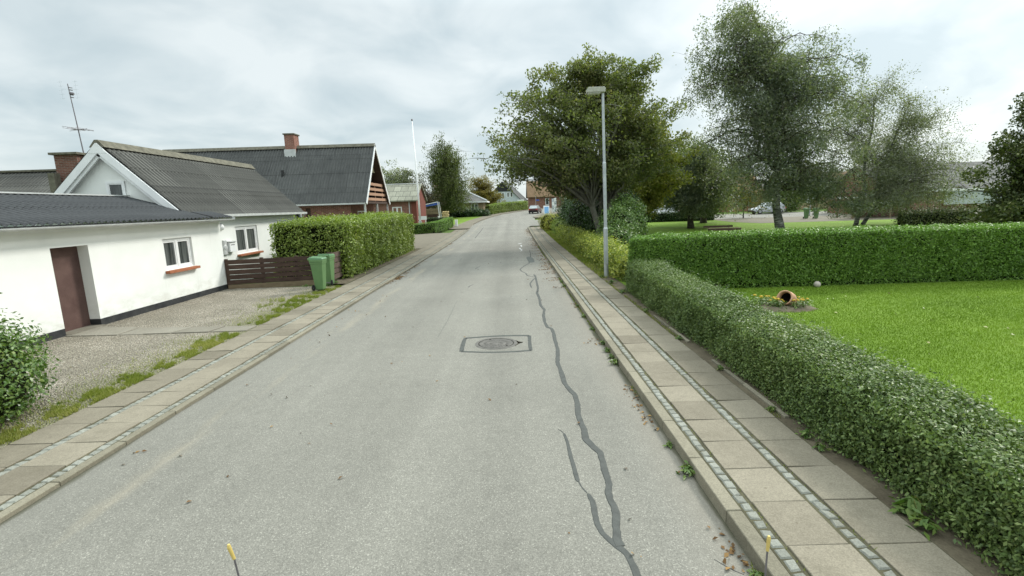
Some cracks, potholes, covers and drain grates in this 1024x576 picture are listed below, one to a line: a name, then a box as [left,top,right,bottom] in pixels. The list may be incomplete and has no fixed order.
manhole cover [475,337,517,350]
